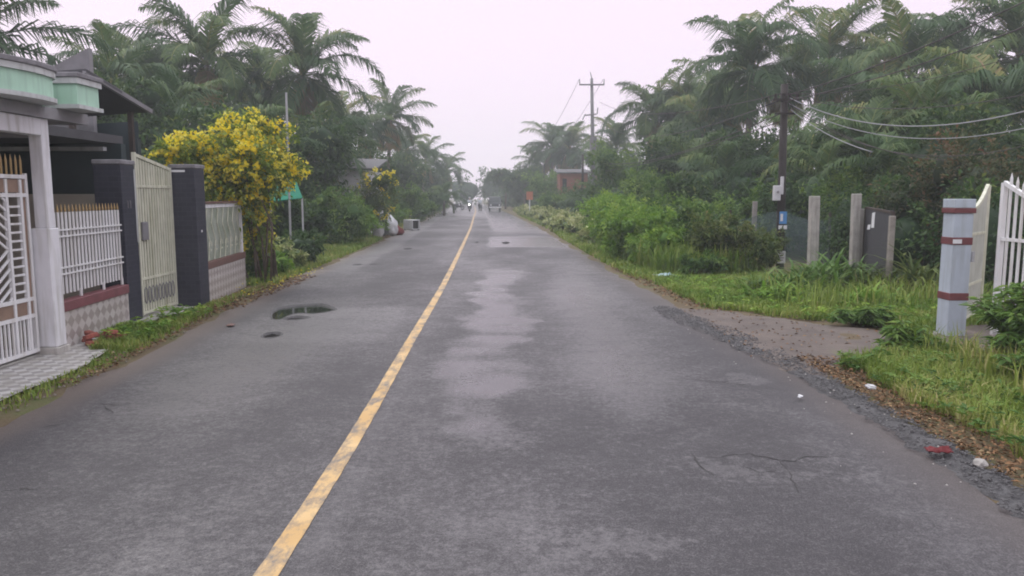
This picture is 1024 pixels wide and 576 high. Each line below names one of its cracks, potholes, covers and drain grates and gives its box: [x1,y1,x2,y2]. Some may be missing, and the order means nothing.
crack [693,453,833,492]
pothole [269,303,338,320]
pothole [261,331,284,339]
